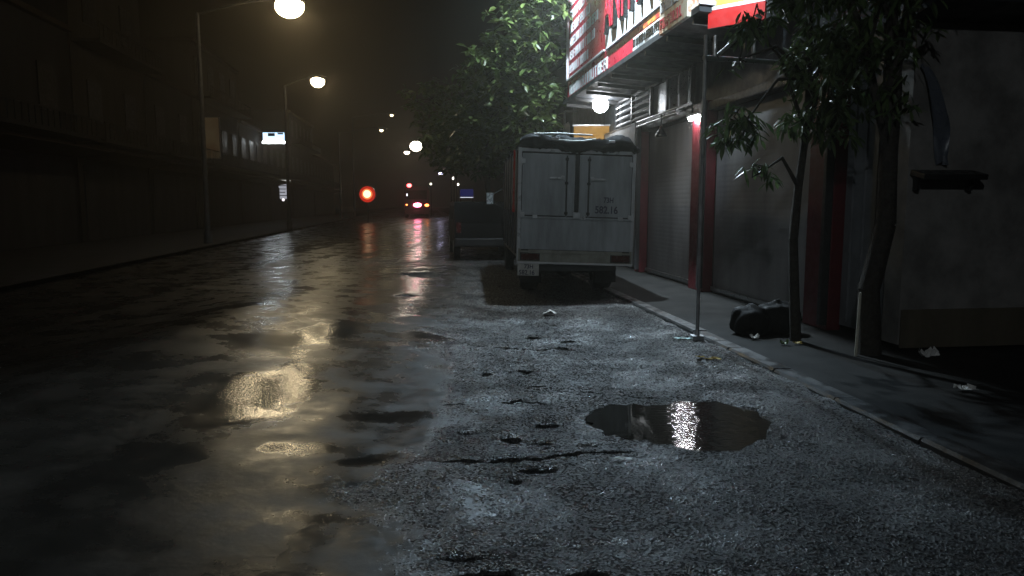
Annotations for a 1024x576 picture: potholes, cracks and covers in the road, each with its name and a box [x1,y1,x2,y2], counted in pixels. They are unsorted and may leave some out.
pothole [583,400,777,451]
crack [400,444,633,464]
